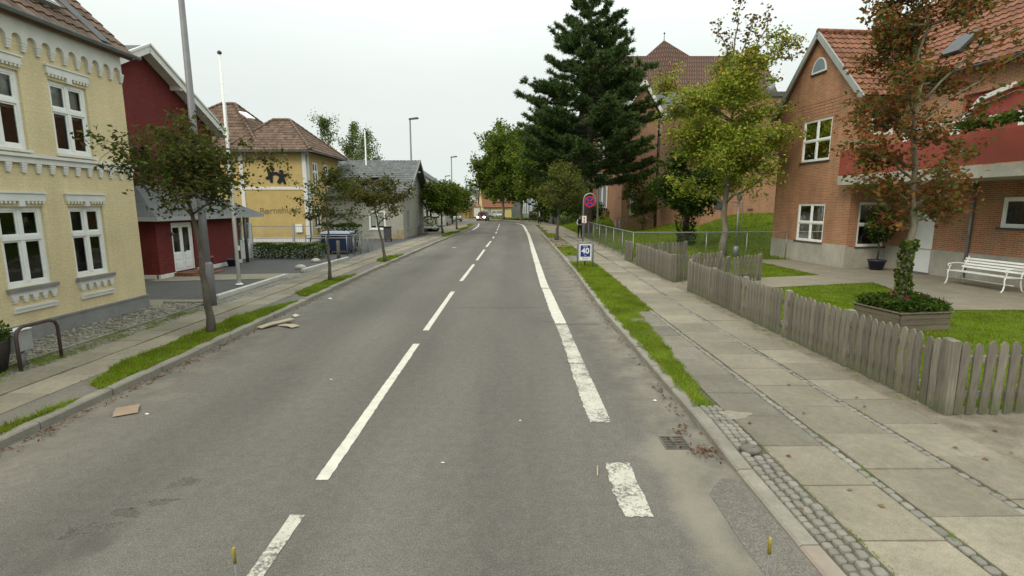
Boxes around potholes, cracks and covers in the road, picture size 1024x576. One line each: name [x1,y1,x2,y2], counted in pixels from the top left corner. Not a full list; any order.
drain grate [658,436,692,450]
